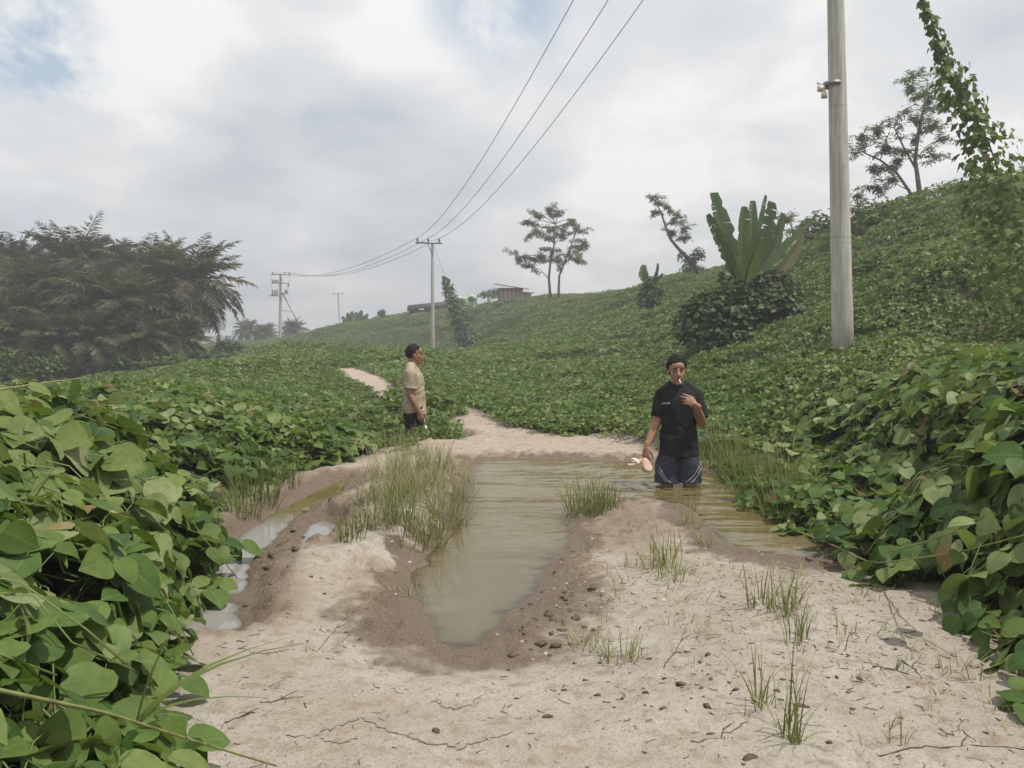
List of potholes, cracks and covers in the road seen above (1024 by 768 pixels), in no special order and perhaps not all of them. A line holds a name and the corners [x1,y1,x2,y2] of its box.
pothole [387,452,635,652]
crack [286,717,513,750]
pothole [192,475,355,605]
crack [430,693,487,710]
